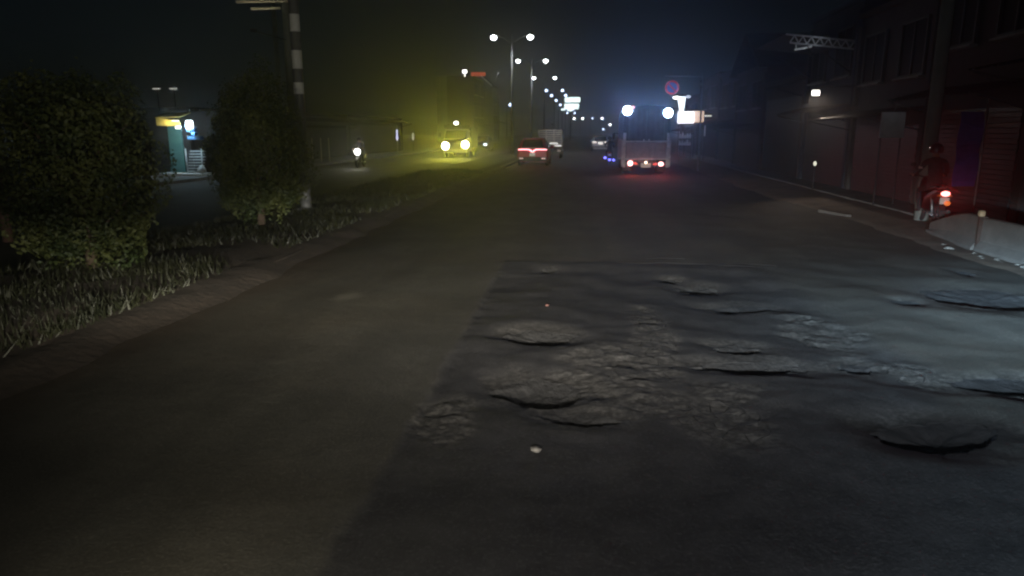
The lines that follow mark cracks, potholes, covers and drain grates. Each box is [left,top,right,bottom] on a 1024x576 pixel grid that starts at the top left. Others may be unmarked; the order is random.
pothole [538,413,623,428]
pothole [688,362,809,376]
pothole [869,420,998,456]
pothole [679,286,719,295]
pothole [713,344,762,355]
crack [637,309,678,380]
pothole [501,331,578,347]
pothole [488,379,585,410]
crack [883,363,933,388]
crack [676,401,772,443]
pothole [919,290,1024,311]
